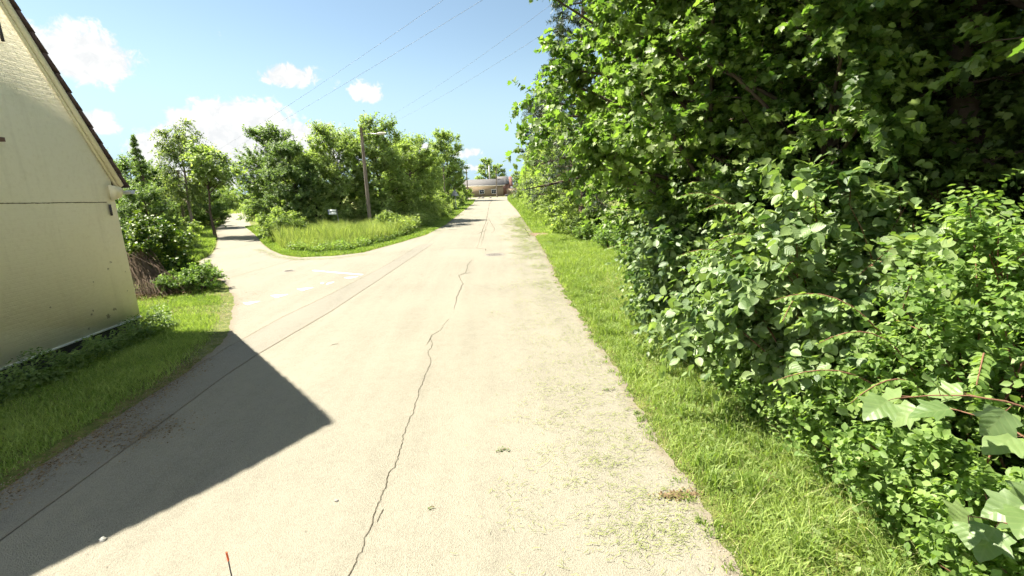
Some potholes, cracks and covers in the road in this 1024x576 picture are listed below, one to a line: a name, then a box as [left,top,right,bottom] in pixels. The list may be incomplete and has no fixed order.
crack [348,319,449,576]
